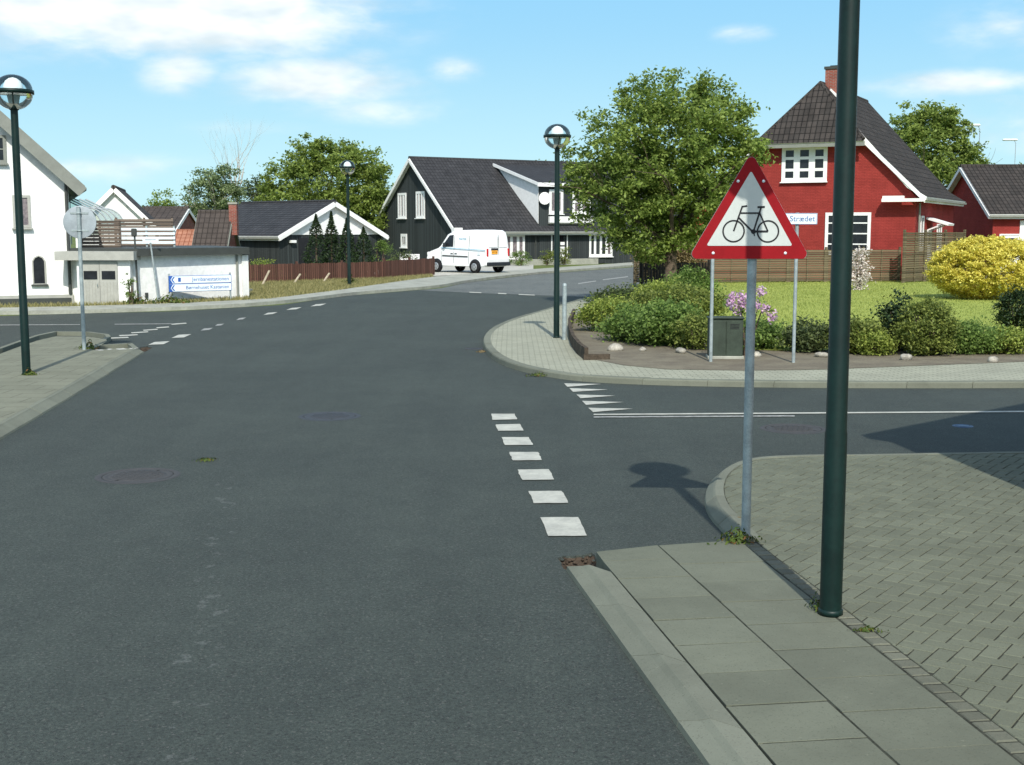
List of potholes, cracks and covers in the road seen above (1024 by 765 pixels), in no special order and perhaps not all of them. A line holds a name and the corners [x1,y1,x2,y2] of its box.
manhole cover [298,412,361,421]
manhole cover [94,468,181,484]
manhole cover [760,423,826,434]
